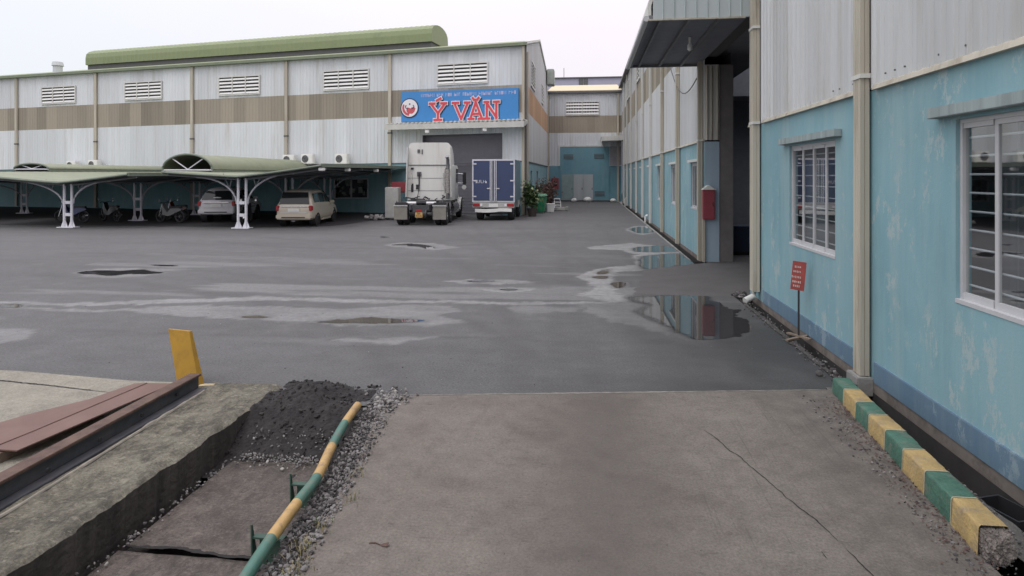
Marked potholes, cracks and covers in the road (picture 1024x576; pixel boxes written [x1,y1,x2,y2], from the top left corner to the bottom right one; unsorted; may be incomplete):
crack [704,430,874,576]
crack [125,545,251,559]
